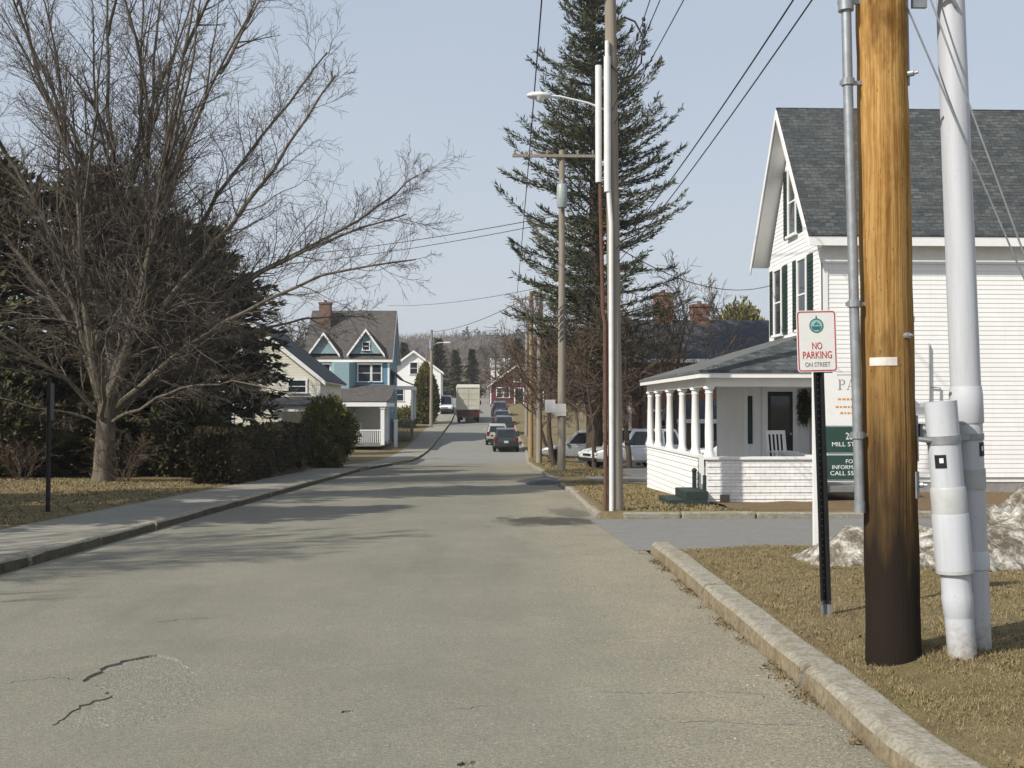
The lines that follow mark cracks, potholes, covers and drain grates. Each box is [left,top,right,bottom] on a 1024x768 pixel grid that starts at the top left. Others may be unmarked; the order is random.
crack [607,691,777,702]
